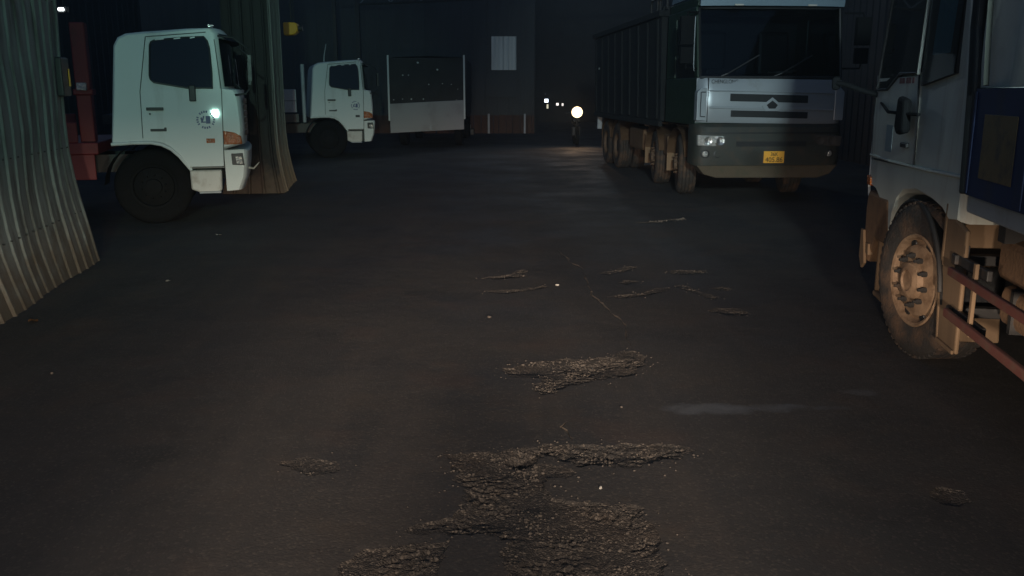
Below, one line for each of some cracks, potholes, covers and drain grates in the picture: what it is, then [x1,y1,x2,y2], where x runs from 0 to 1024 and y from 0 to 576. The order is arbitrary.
pothole [337,536,450,576]
crack [558,250,631,347]
pothole [500,348,670,398]
pothole [277,452,357,479]
pothole [391,435,704,576]
pothole [913,487,973,507]
